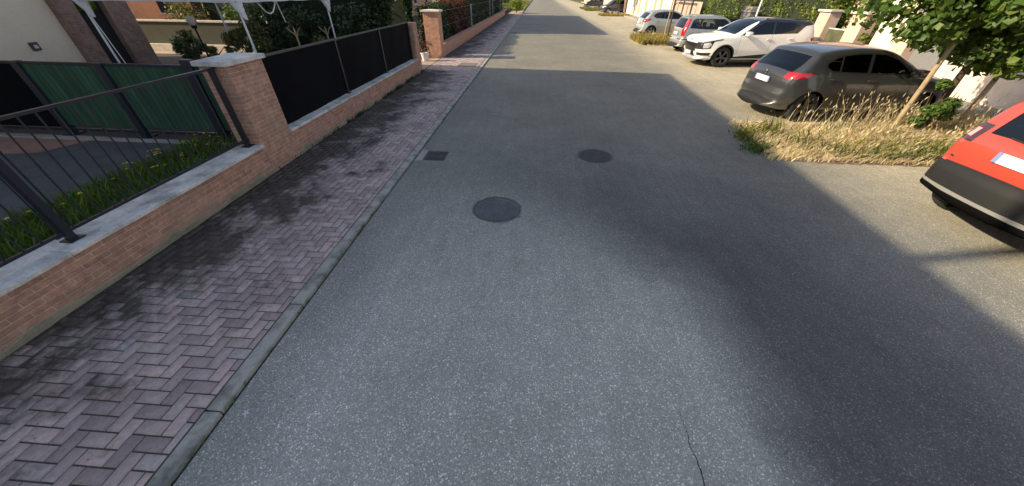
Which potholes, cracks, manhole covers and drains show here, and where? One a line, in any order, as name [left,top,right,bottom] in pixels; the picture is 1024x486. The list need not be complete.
manhole cover [575,149,615,164]
drain grate [423,151,449,161]
crack [680,414,705,486]
manhole cover [472,196,522,223]
